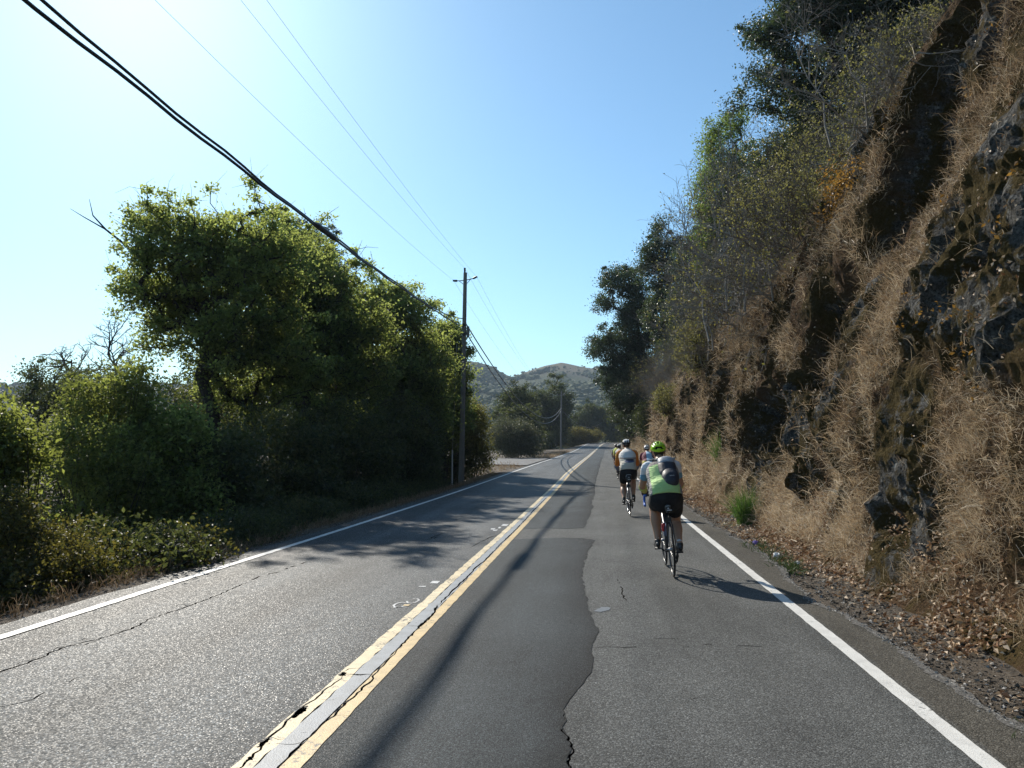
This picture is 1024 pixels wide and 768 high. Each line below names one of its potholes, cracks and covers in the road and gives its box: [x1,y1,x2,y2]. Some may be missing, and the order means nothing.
crack [0,562,305,672]
crack [561,712,575,768]
